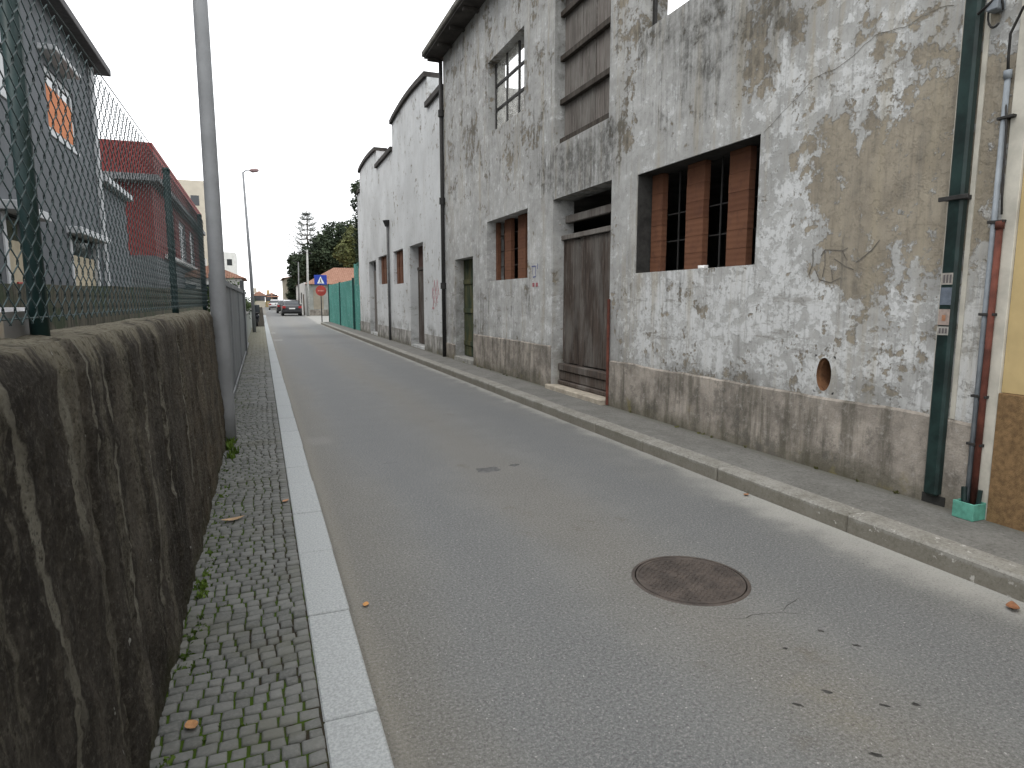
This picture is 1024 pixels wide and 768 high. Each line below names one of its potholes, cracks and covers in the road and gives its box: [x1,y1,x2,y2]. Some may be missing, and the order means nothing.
manhole cover [631,556,751,606]
